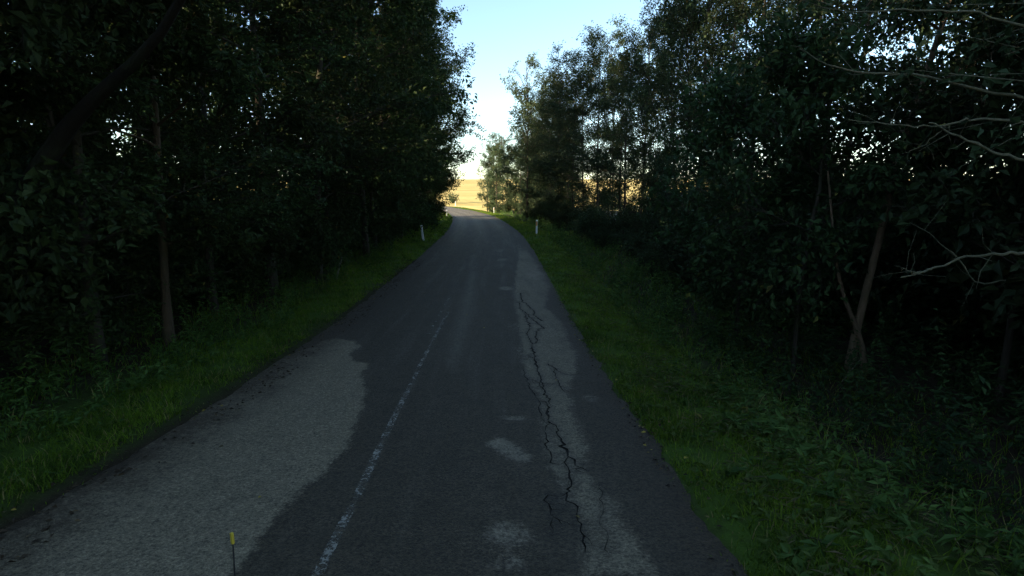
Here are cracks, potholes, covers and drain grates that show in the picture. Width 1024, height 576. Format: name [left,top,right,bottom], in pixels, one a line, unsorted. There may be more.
crack [517,293,608,552]
